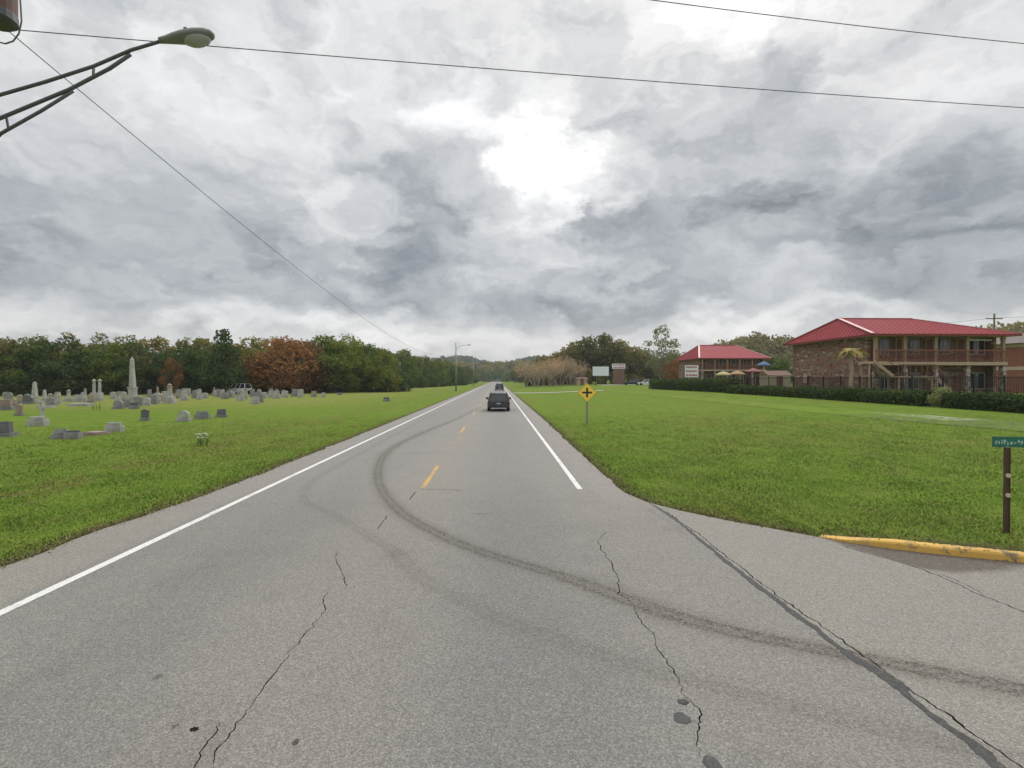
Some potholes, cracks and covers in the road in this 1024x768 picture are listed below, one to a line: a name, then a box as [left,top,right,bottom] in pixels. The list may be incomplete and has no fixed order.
crack [597,531,703,753]
crack [845,546,1024,612]
crack [193,552,347,768]
